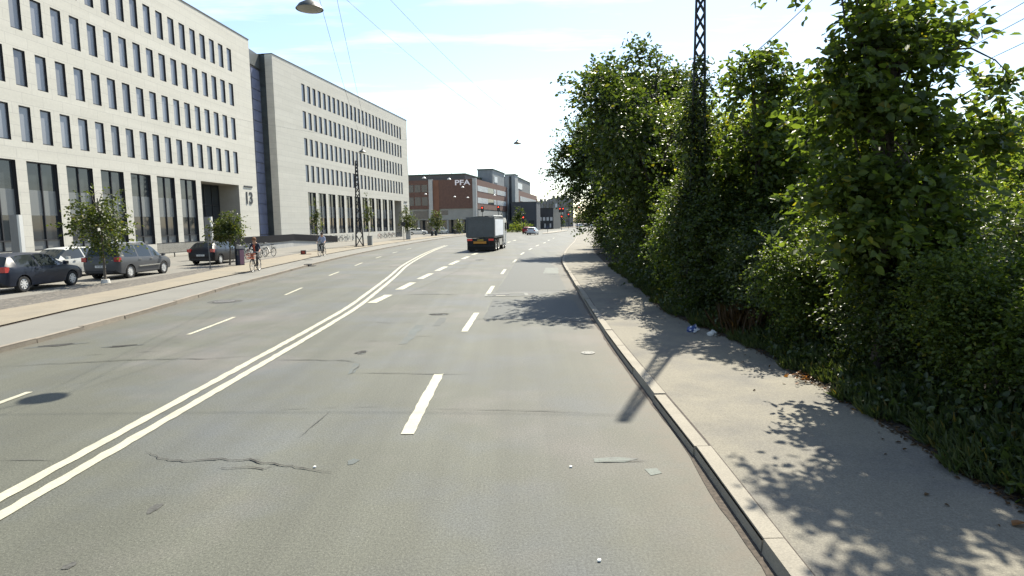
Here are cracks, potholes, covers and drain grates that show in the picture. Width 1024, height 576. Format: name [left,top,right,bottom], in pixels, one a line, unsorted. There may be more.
crack [145,451,333,473]
